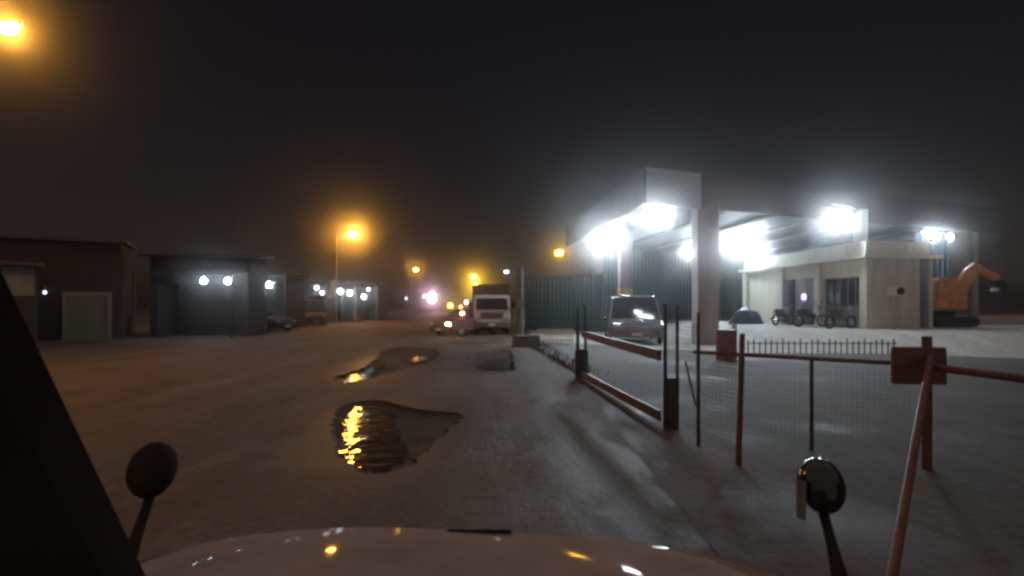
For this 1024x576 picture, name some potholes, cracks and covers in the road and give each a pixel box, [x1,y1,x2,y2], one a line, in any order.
pothole [333,347,440,382]
pothole [329,400,464,475]
pothole [466,350,516,372]
